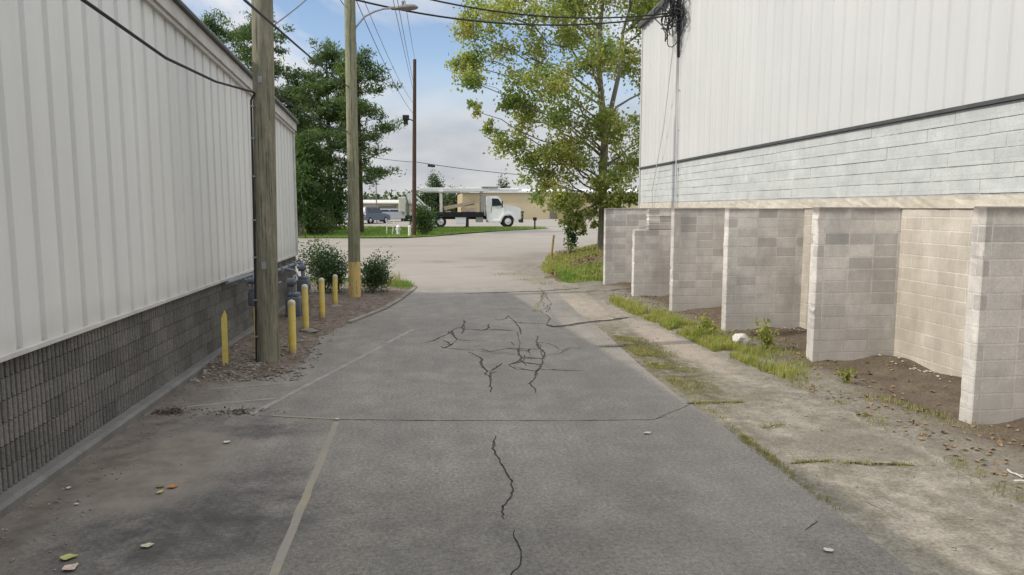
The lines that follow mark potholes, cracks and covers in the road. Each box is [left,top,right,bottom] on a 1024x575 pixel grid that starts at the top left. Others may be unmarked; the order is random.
crack [425,288,629,393]
crack [260,401,743,575]
